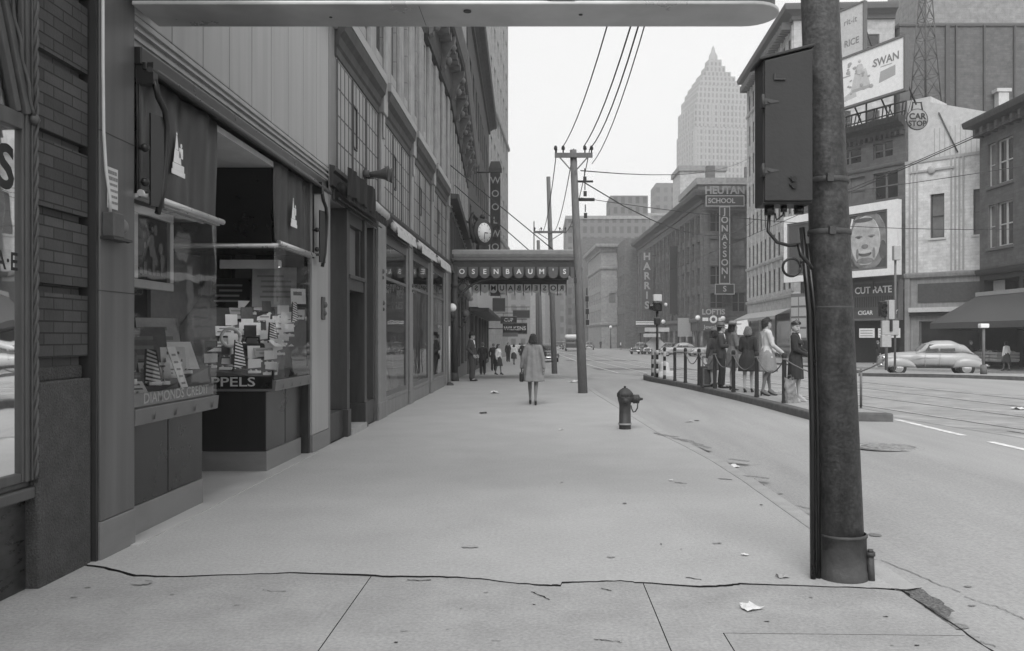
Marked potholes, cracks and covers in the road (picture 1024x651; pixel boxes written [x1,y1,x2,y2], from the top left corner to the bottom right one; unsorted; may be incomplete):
manhole cover [860,443,925,451]
